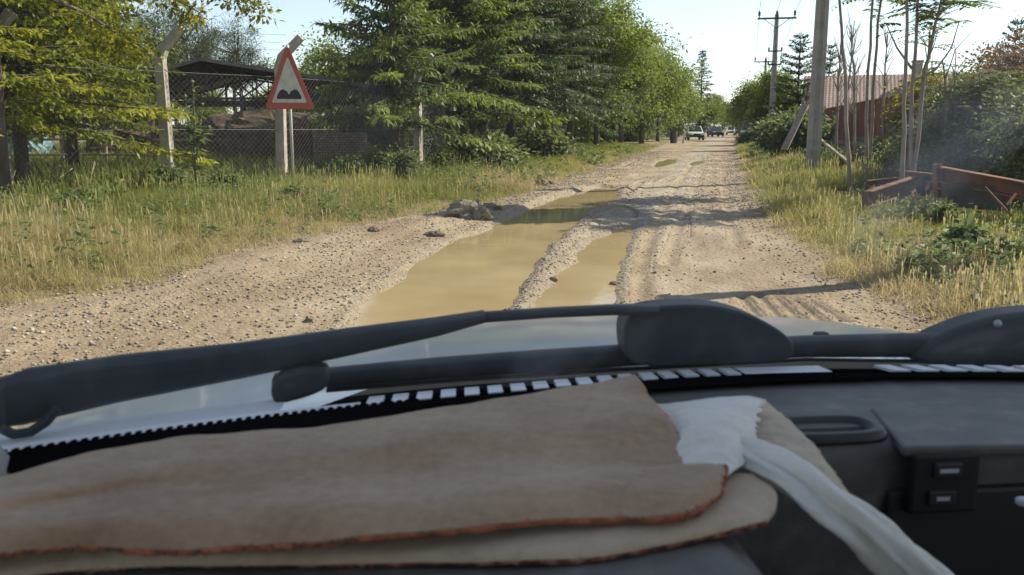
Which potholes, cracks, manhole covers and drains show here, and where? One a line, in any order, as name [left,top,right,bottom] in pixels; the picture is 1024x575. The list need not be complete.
pothole [650,158,680,167]
pothole [329,184,626,330]
